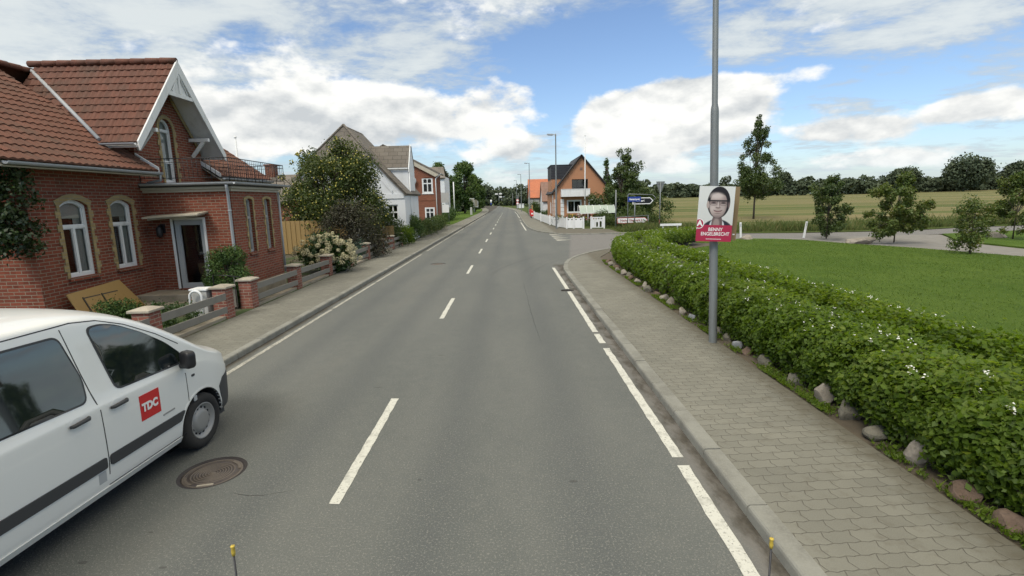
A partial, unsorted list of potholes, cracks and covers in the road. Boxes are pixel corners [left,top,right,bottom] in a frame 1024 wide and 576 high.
manhole cover [176,457,248,489]
